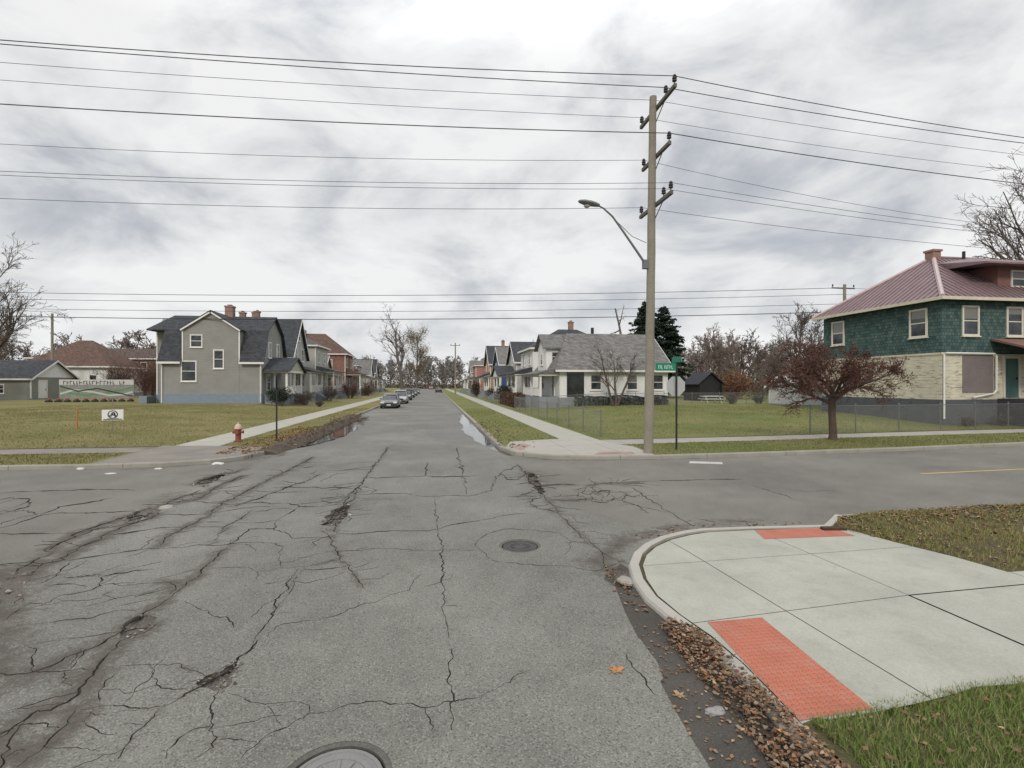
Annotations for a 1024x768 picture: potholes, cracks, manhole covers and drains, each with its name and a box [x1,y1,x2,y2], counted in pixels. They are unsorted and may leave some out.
manhole cover [499,539,541,552]
pothole [192,472,231,487]
pothole [321,504,353,530]
manhole cover [288,741,392,768]
pothole [117,613,158,639]
pothole [190,660,244,693]
crack [0,448,749,768]
pothole [120,507,161,522]
pothole [526,471,547,495]
